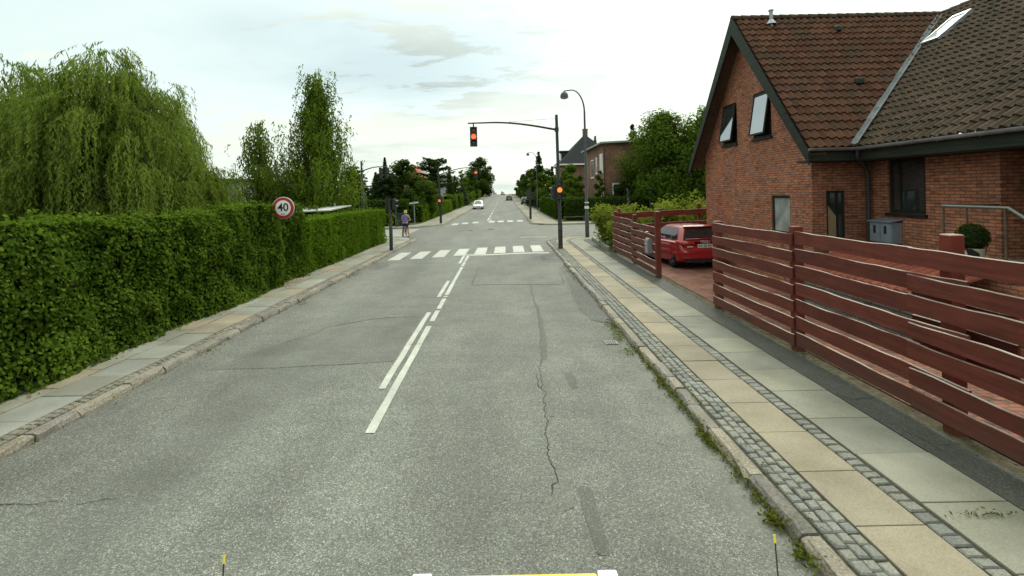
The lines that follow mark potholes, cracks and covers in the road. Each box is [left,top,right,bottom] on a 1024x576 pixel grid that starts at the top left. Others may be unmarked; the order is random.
crack [472,265,565,495]
